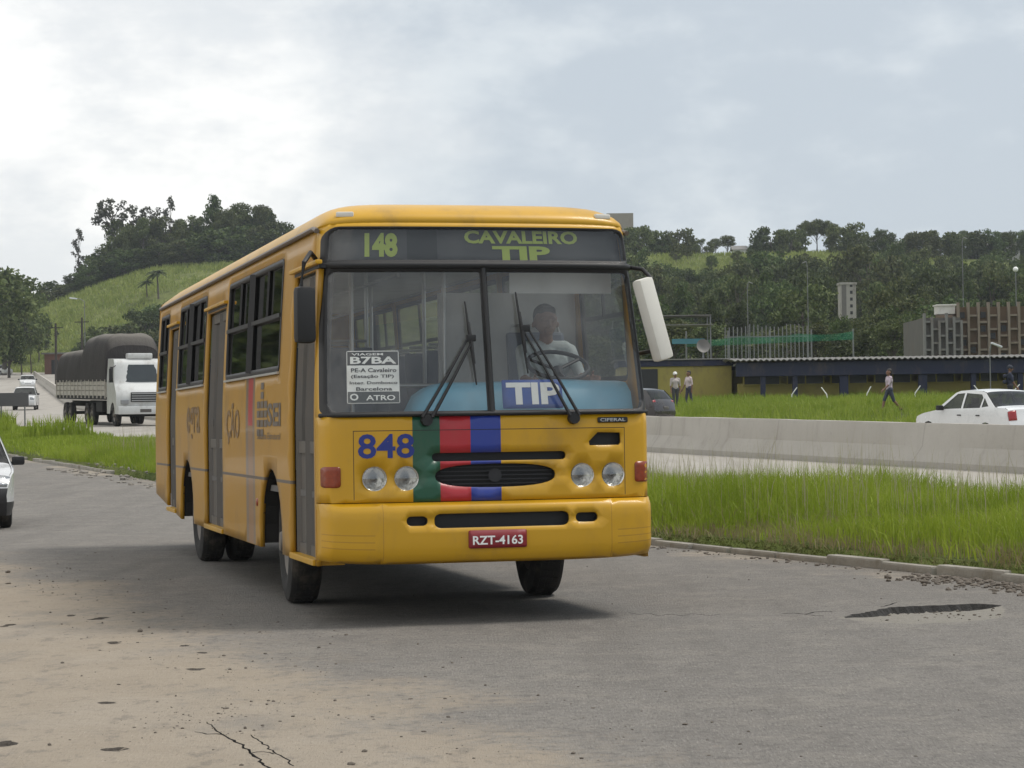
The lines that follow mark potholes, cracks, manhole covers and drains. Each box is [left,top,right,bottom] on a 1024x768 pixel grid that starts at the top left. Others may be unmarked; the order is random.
crack [198,722,294,768]
pothole [840,603,1007,624]
